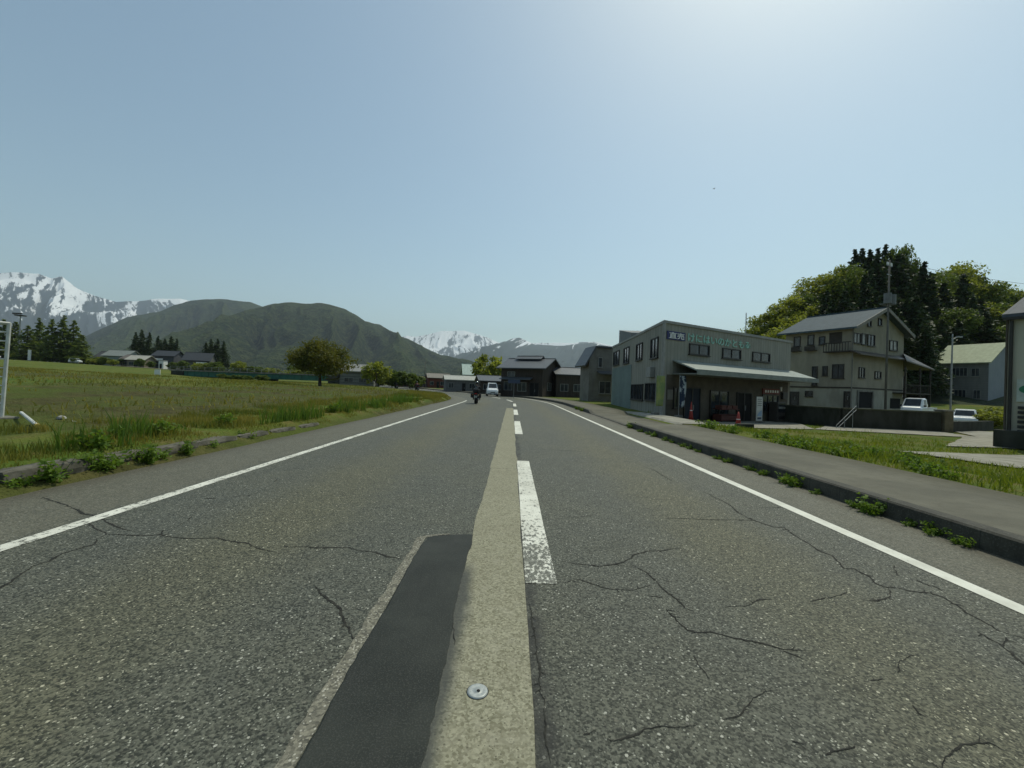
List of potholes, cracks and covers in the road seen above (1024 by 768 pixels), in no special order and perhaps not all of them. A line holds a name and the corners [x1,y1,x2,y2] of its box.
crack [285,545,400,559]
crack [929,735,1010,768]
crack [0,495,277,588]
crack [645,466,1024,664]
crack [825,744,855,755]
crack [559,548,847,659]
crack [583,686,771,742]
crack [314,585,353,638]
